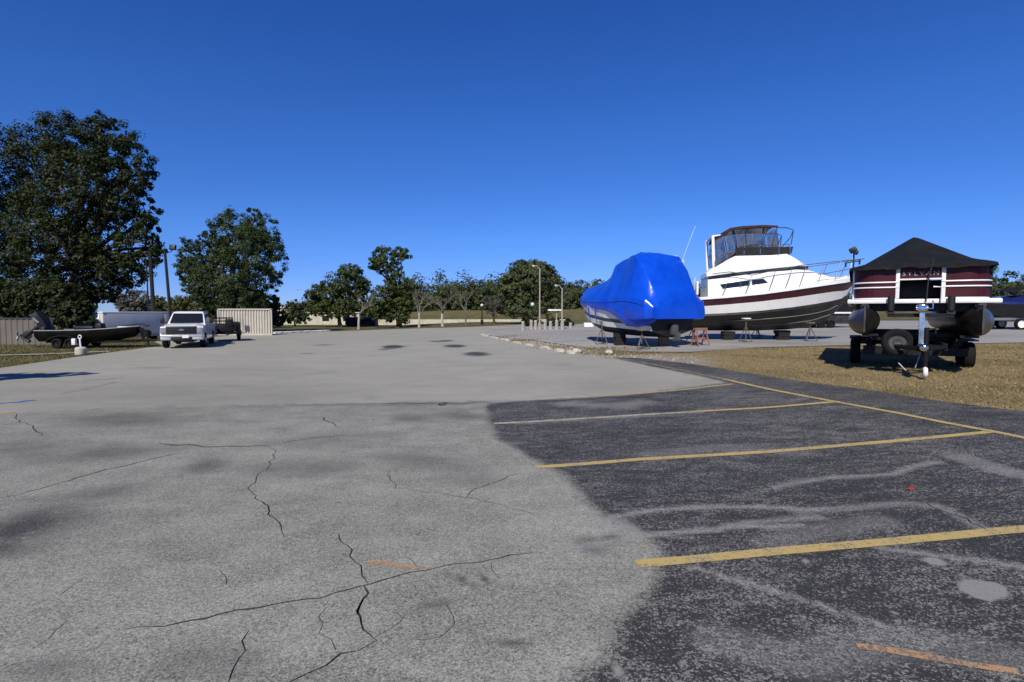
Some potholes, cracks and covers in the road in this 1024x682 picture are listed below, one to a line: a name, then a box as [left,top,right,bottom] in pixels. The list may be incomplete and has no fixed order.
crack [127,534,542,682]
crack [387,473,530,513]
crack [248,418,345,537]
crack [913,488,1024,545]
